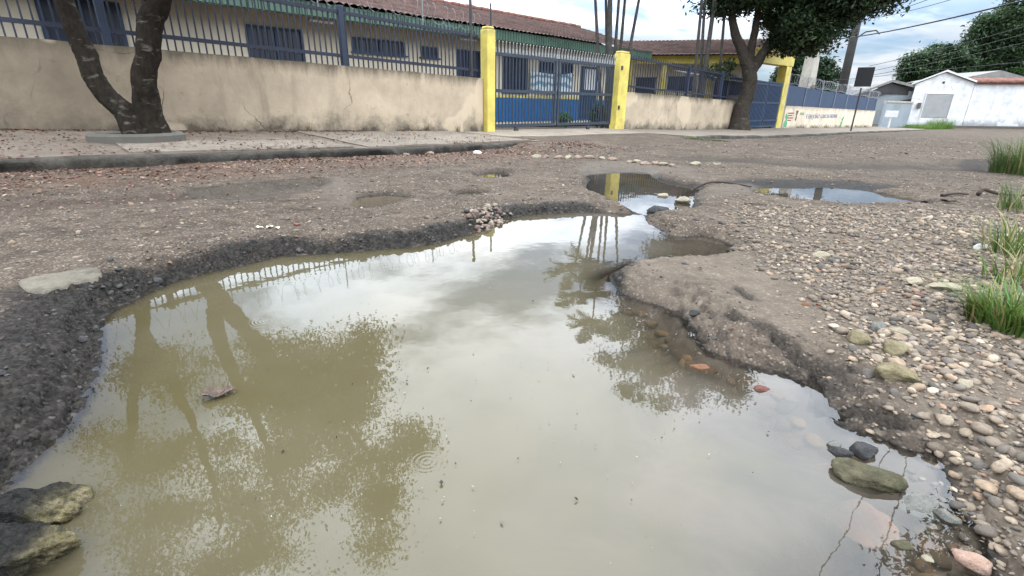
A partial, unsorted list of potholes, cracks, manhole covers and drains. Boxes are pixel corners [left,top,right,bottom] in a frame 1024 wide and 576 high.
pothole [0,198,1024,576]
pothole [175,176,335,202]
pothole [469,167,516,177]
pothole [337,187,422,208]
pothole [704,176,945,203]
